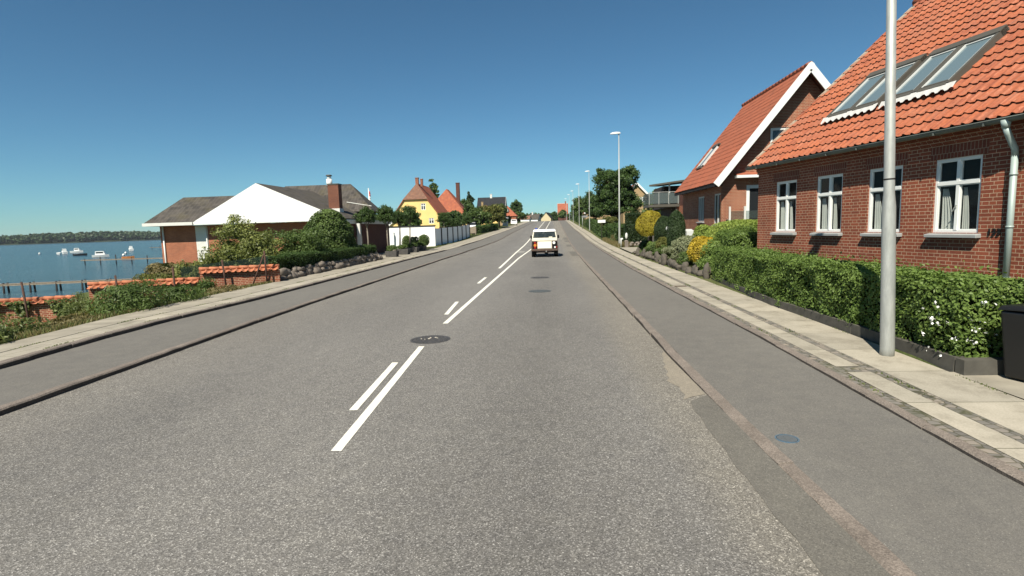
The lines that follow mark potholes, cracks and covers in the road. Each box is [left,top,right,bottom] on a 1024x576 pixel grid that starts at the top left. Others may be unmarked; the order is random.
manhole cover [410,335,450,344]
manhole cover [775,434,800,443]
